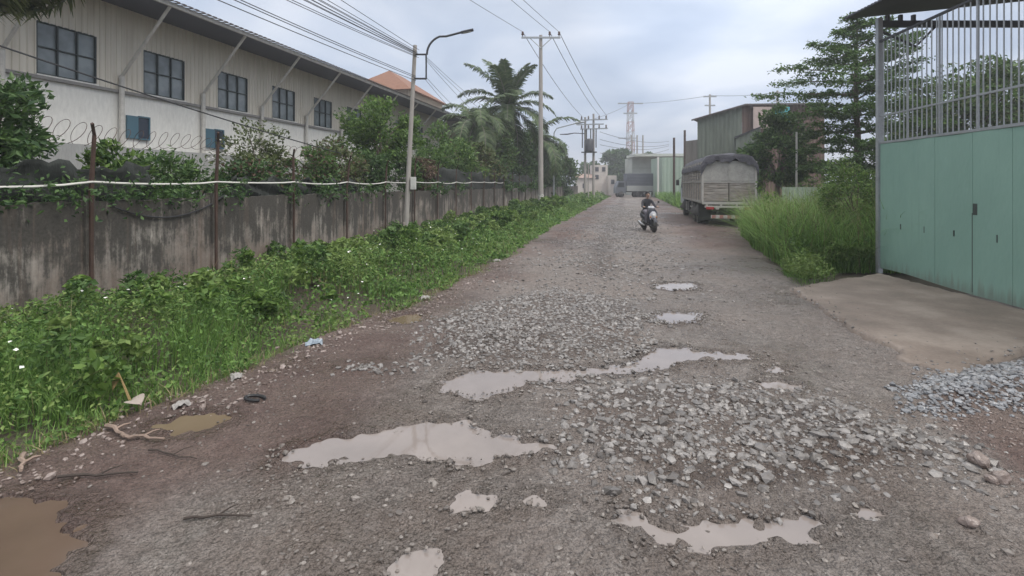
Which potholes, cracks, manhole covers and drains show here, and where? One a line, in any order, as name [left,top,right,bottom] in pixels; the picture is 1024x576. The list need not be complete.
pothole [0,491,97,576]
pothole [444,485,508,520]
pothole [434,345,756,402]
pothole [373,542,449,576]
pothole [518,488,556,509]
pothole [148,409,233,437]
pothole [267,417,564,473]
pothole [601,499,869,557]
